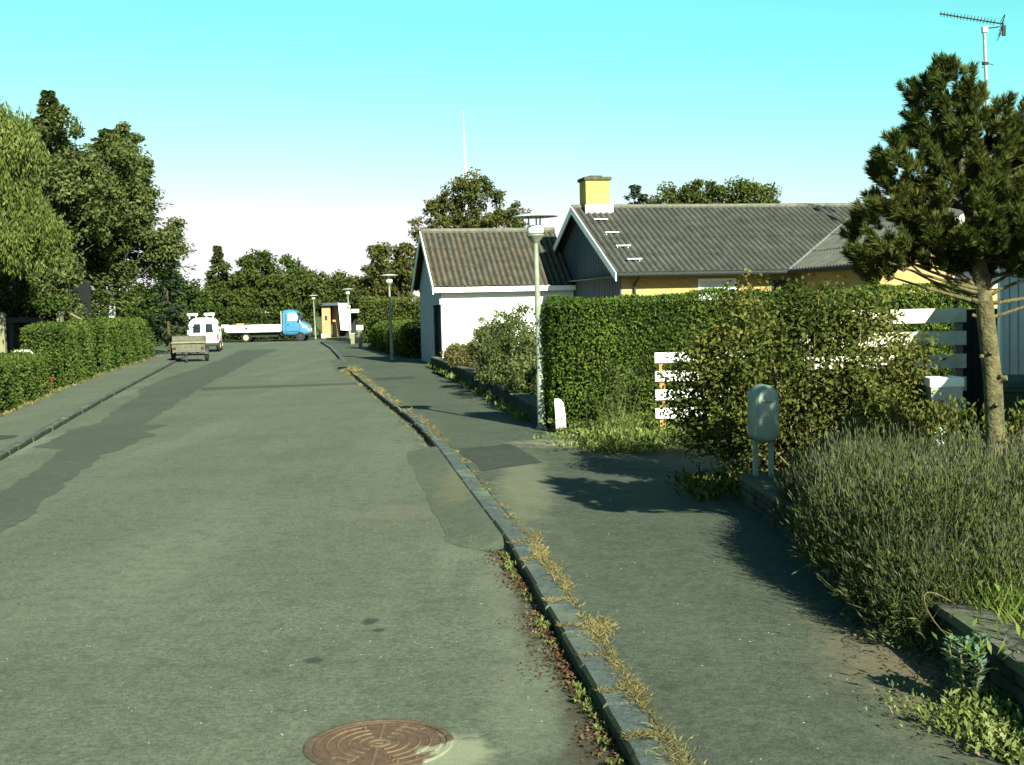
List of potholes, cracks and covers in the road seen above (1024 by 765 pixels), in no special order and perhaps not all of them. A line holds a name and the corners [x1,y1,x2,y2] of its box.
manhole cover [303,718,454,765]
